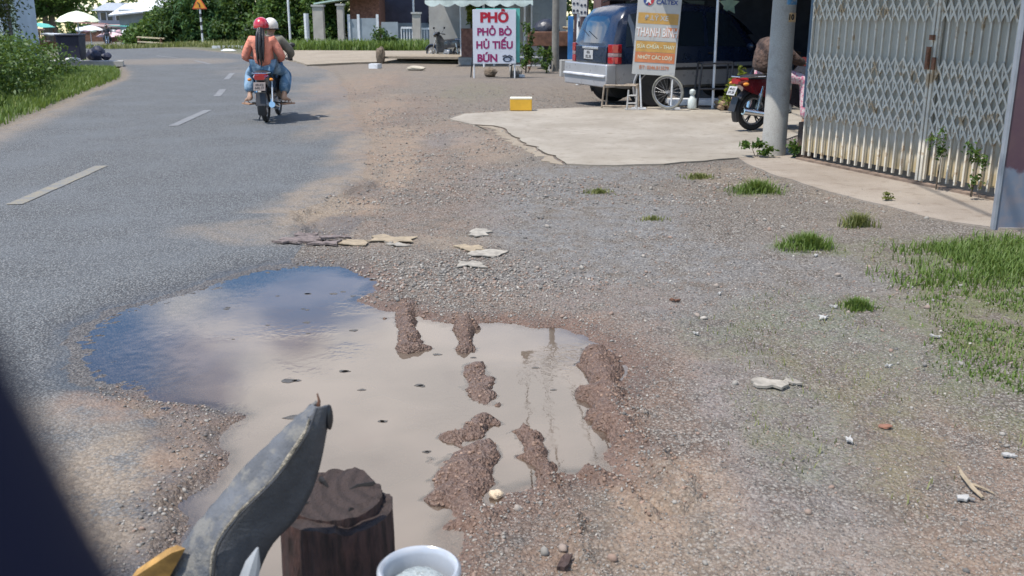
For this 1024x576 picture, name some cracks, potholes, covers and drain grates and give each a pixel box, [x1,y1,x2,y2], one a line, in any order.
pothole [59,261,721,576]
